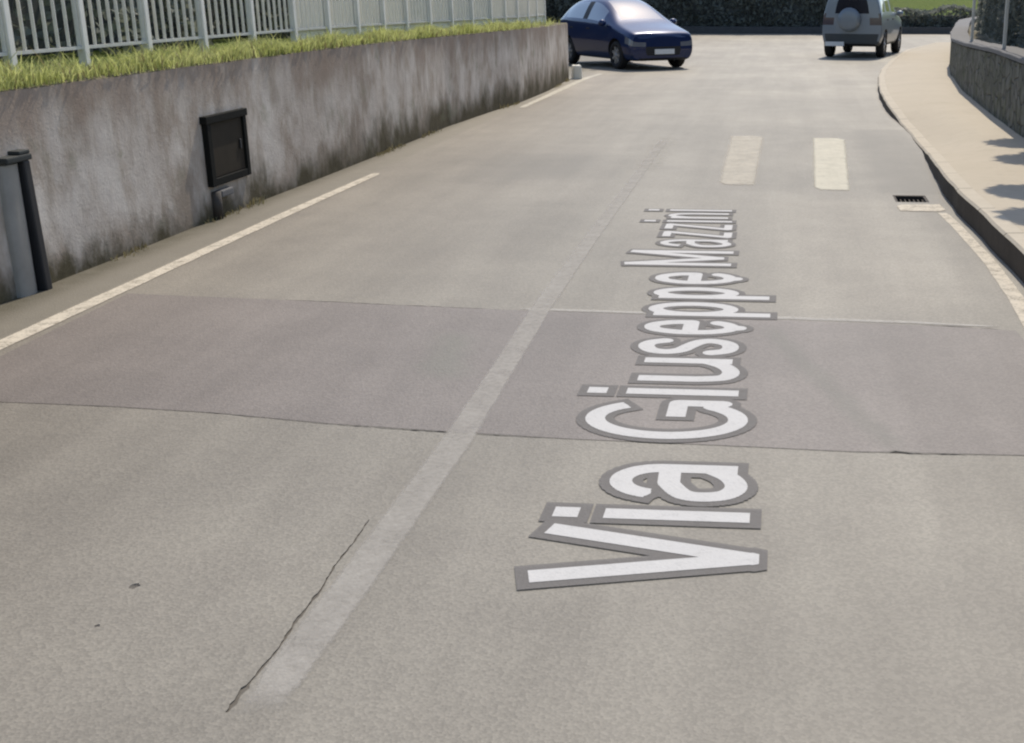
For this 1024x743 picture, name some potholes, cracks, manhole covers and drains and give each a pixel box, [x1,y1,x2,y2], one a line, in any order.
crack [226,519,370,712]
